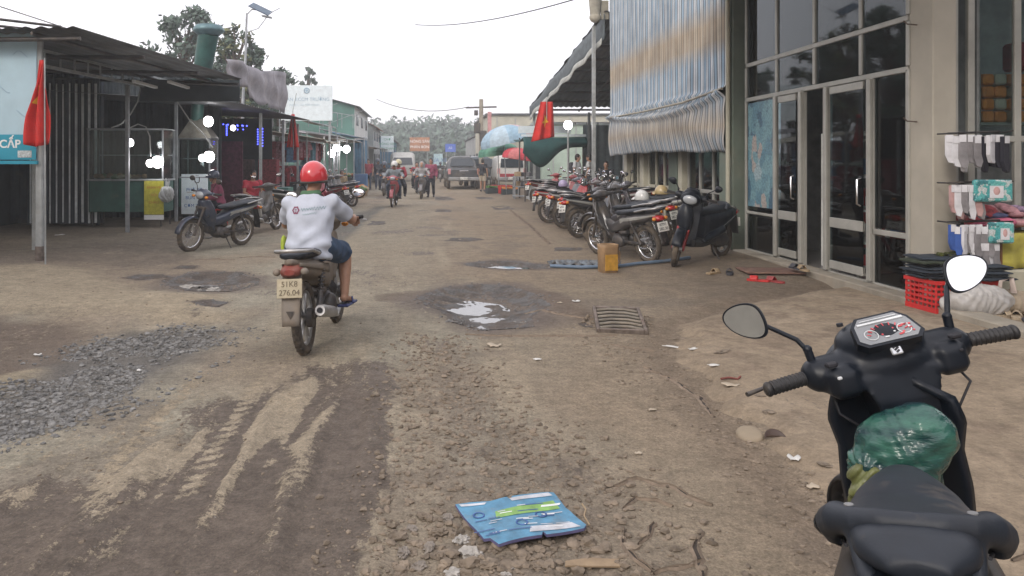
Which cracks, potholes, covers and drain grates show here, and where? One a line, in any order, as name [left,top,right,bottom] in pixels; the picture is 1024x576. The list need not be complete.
drain grate [581,306,655,335]
pothole [413,282,554,333]
pothole [463,260,550,270]
crack [613,476,713,576]
pothole [160,271,266,292]
pothole [186,299,228,307]
